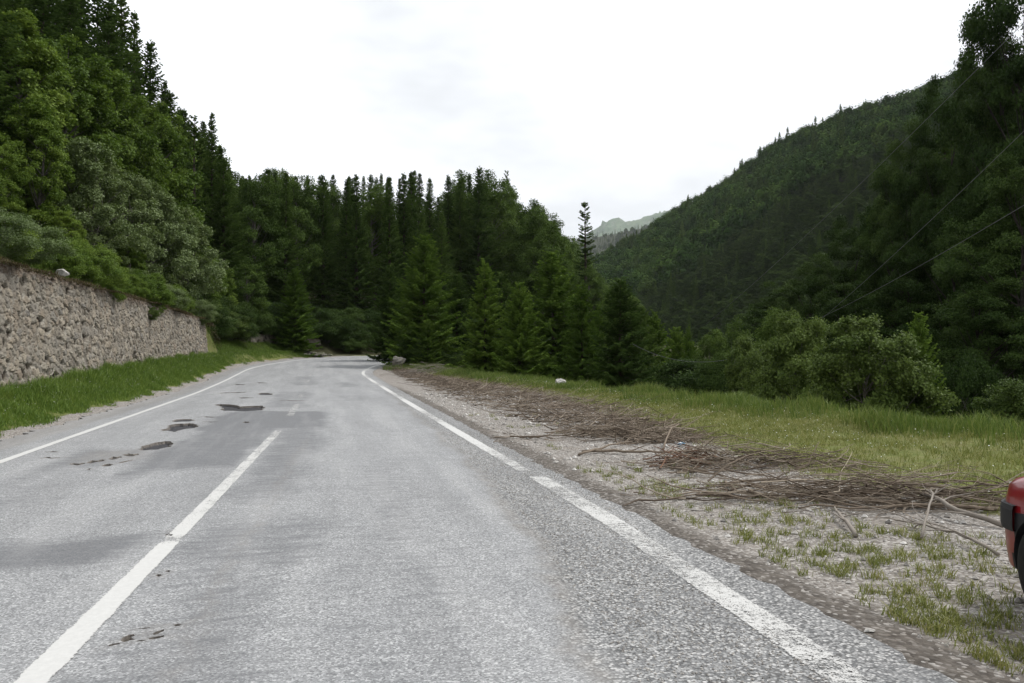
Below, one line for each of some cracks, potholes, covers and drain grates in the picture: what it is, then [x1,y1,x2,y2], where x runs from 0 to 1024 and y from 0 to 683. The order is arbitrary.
pothole [108,624,181,646]
pothole [141,441,173,450]
pothole [162,423,198,432]
